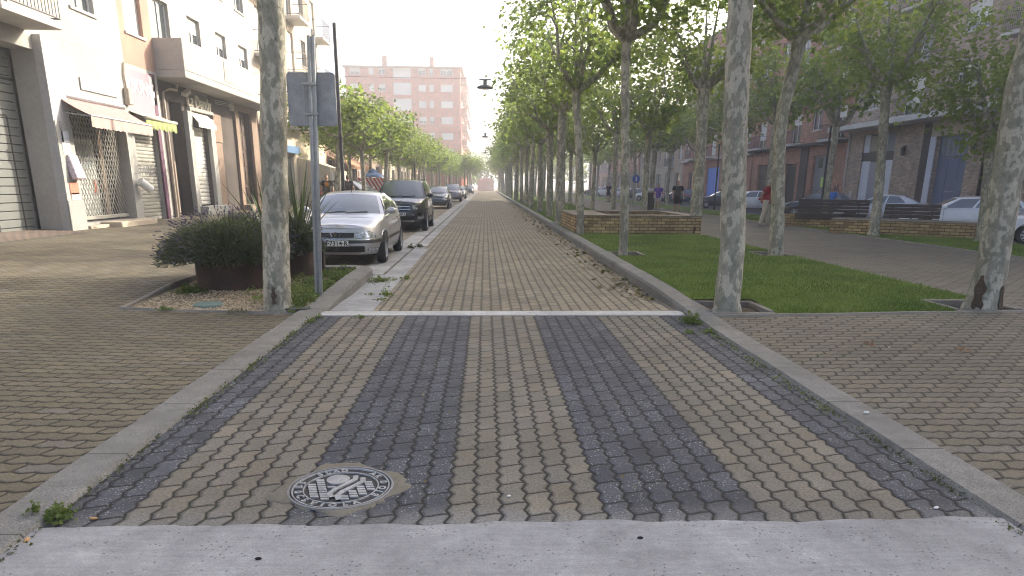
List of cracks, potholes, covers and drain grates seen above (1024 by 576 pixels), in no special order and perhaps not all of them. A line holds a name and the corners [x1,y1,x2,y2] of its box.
manhole cover [265,462,412,517]
